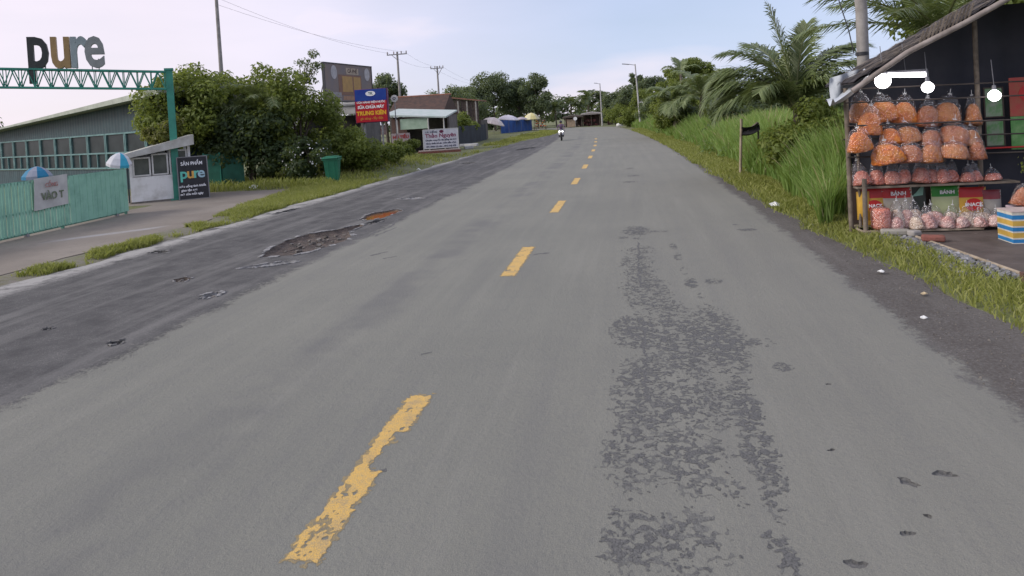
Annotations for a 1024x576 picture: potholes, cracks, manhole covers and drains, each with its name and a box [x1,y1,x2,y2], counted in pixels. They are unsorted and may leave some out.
pothole [897,477,921,488]
pothole [843,559,869,569]
pothole [358,209,404,221]
pothole [258,223,366,258]
pothole [197,290,228,299]
